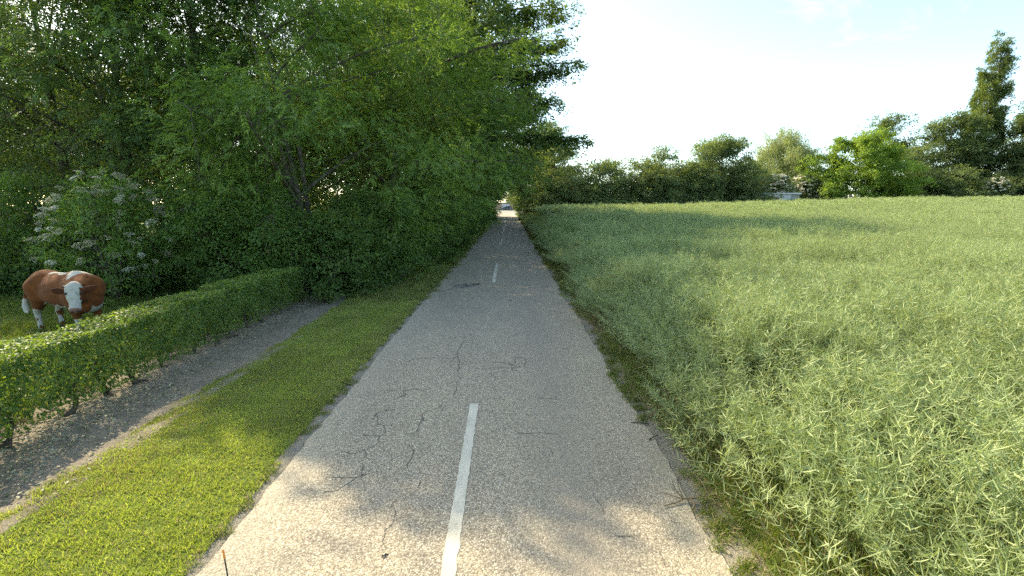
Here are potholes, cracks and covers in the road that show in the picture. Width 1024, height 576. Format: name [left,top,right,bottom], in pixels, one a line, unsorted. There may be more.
crack [319,342,463,493]
